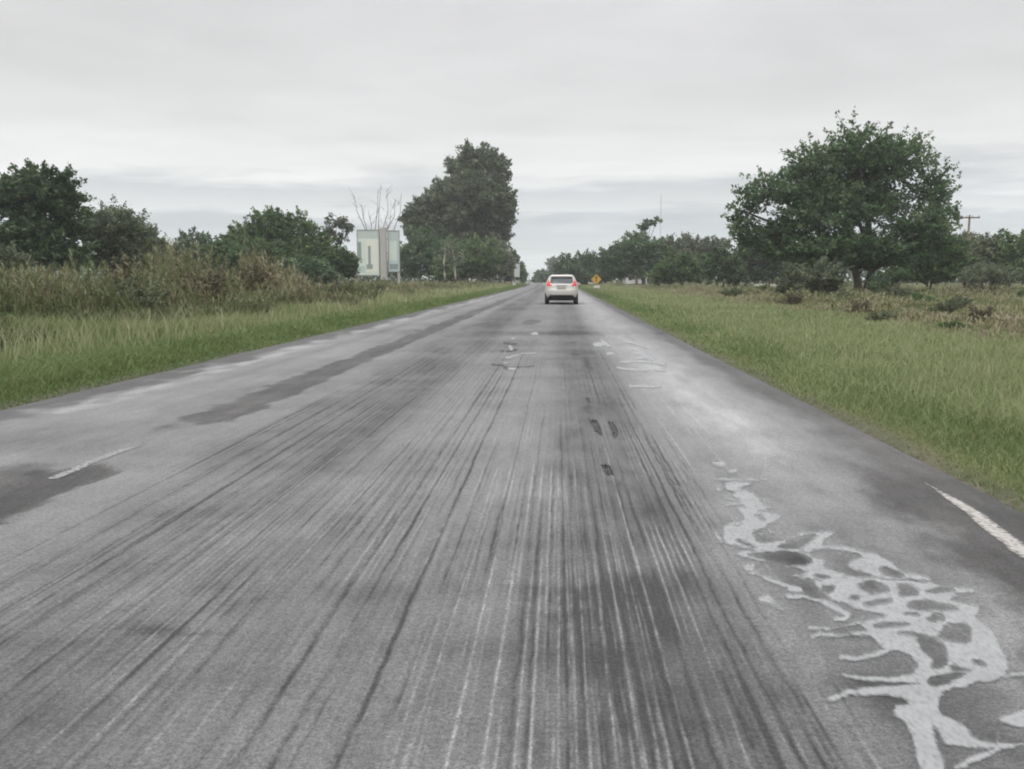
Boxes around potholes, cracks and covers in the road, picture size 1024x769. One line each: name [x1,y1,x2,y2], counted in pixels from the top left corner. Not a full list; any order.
pothole [588,419,603,436]
crack [711,459,1024,769]
pothole [608,421,619,439]
